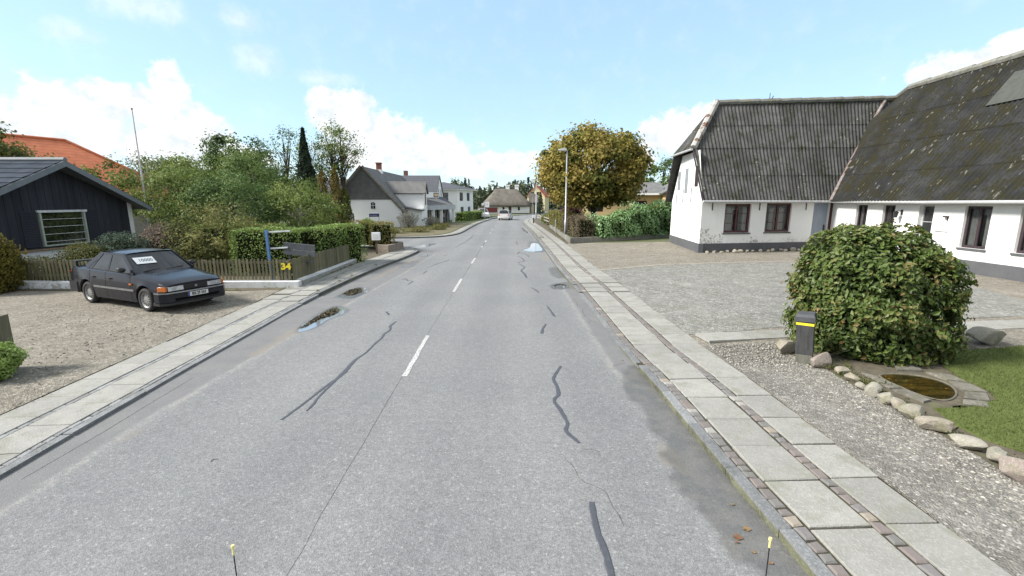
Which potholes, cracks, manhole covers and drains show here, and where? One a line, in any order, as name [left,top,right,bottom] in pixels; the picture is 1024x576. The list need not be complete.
crack [565,449,624,525]
